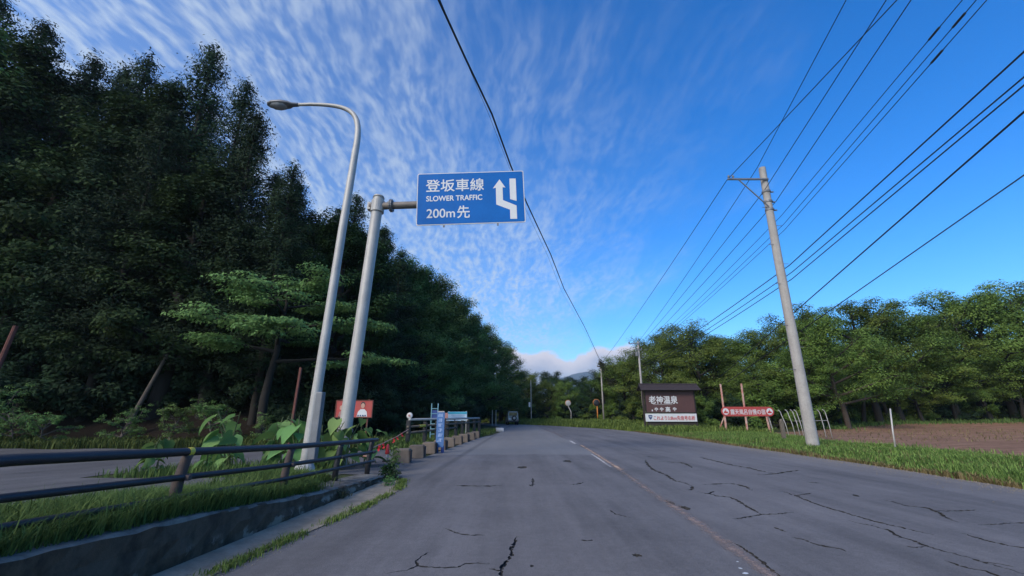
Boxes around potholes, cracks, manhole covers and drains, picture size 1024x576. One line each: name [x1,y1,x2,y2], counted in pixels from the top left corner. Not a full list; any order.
crack [390,537,517,576]
crack [645,456,1024,576]
